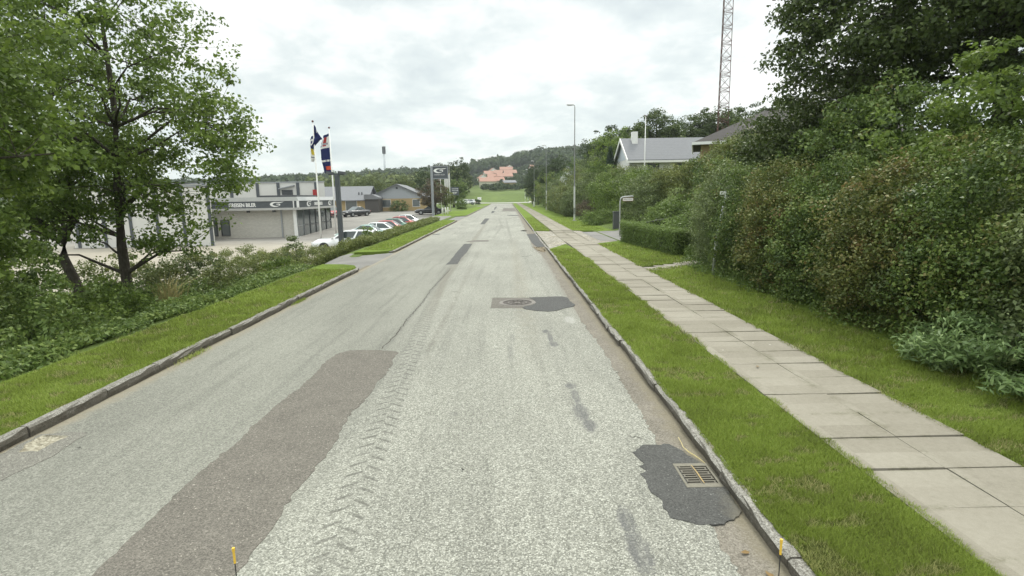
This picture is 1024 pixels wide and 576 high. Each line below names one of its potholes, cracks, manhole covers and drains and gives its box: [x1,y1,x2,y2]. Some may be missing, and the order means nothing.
crack [382,268,451,348]
drain grate [673,463,724,488]
